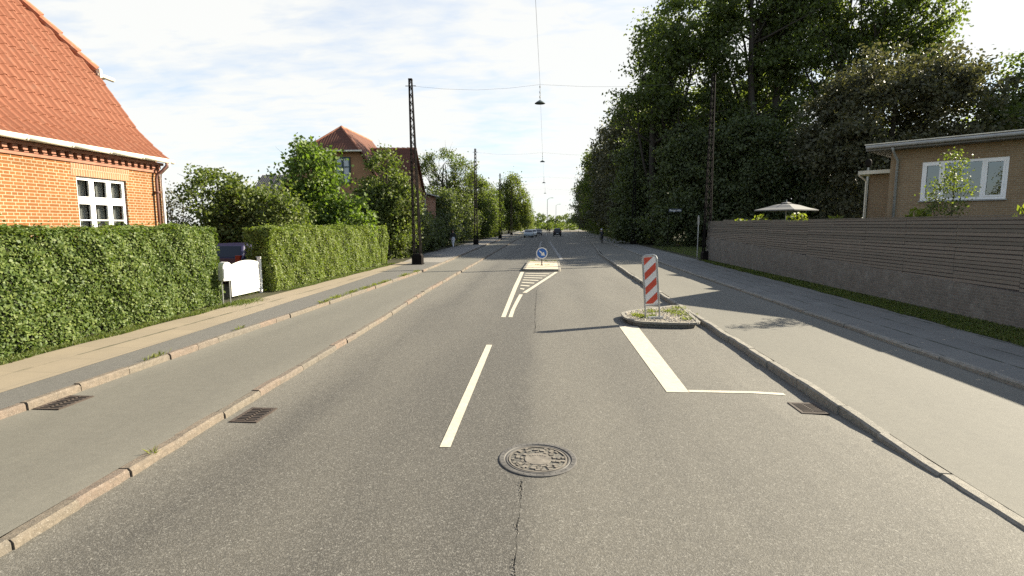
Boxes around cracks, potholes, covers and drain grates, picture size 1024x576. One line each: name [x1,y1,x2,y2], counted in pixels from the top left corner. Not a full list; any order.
drain grate [787,402,830,415]
manhole cover [499,443,577,478]
drain grate [229,407,278,423]
drain grate [33,395,94,410]
crack [510,480,523,576]
